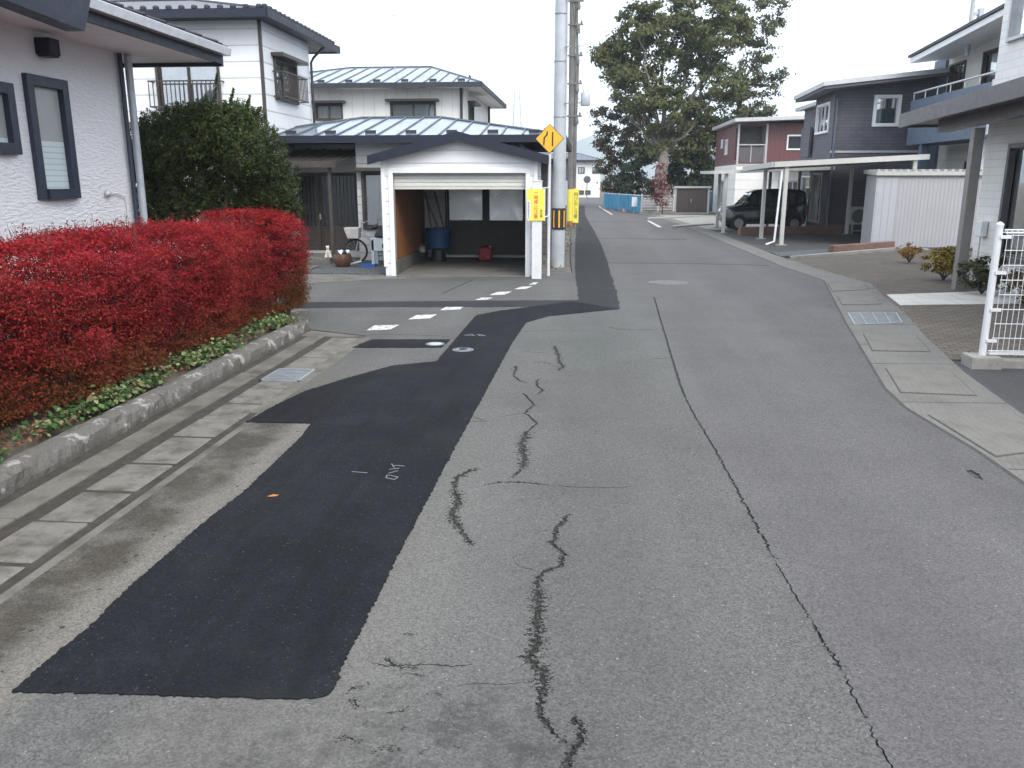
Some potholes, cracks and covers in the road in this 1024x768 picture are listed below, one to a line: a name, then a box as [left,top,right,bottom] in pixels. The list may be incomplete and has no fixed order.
crack [445,326,654,547]
crack [332,514,588,768]
drain grate [259,368,317,382]
drain grate [847,312,903,325]
